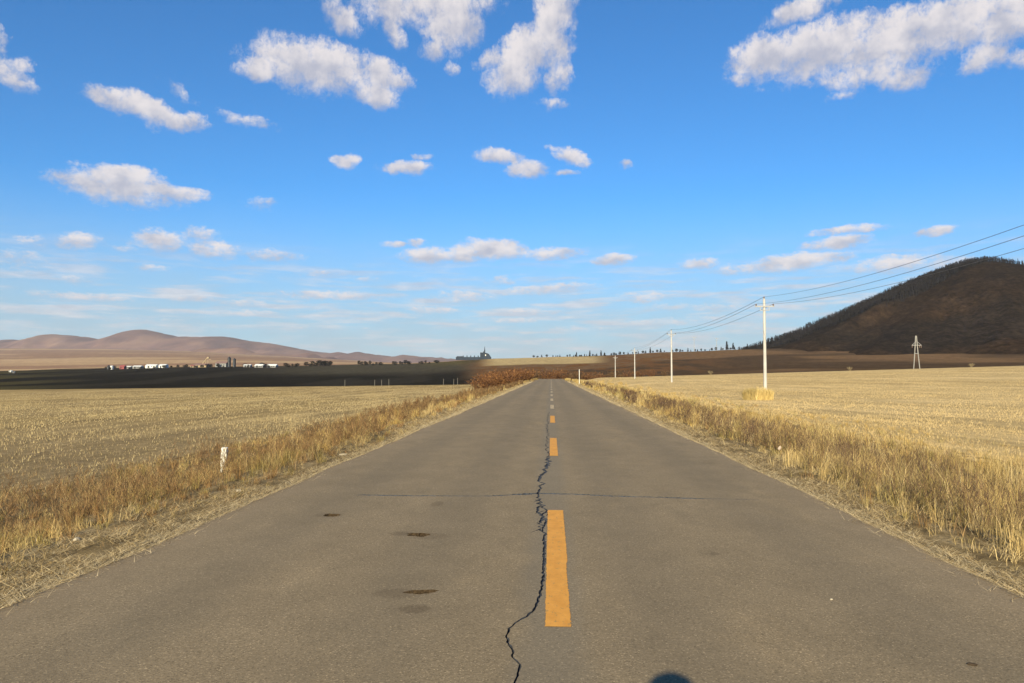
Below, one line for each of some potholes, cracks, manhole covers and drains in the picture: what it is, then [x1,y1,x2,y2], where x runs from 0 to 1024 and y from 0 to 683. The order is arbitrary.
crack [363,413,751,683]
